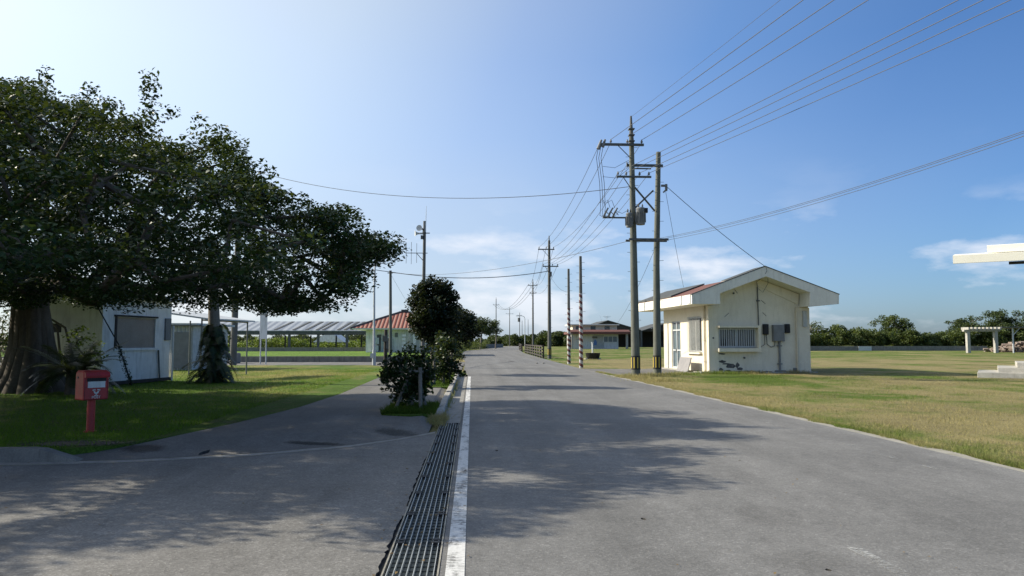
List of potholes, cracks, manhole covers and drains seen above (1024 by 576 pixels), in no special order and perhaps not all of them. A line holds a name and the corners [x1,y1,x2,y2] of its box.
drain grate [426,452,455,465]
drain grate [431,443,456,454]
drain grate [385,541,441,576]
drain grate [437,428,458,437]
drain grate [397,513,445,545]
drain grate [421,462,453,479]
drain grate [434,435,457,445]
drain grate [415,476,451,496]
drain grate [407,492,448,517]
